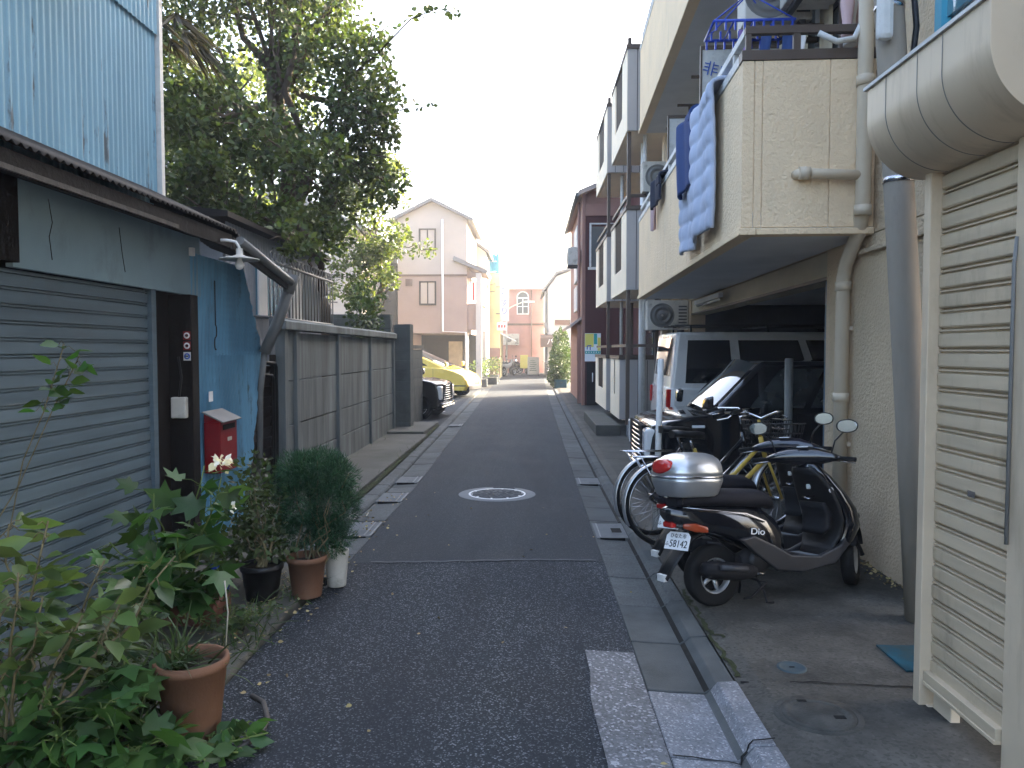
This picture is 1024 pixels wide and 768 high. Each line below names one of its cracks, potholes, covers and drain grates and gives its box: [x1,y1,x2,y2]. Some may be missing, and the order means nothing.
manhole cover [459,487,536,502]
crack [673,737,775,765]
manhole cover [773,695,865,736]
utility cover [777,661,807,674]
